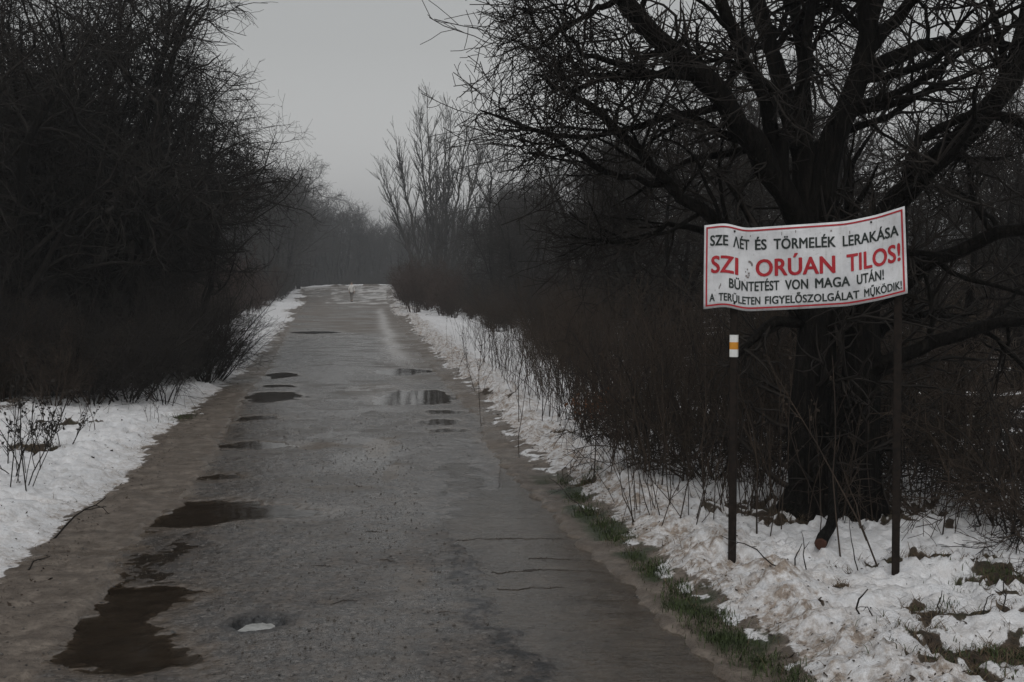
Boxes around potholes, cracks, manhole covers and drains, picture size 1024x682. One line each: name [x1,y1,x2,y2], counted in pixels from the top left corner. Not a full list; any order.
crack [495,557,584,590]
pothole [219,612,297,635]
